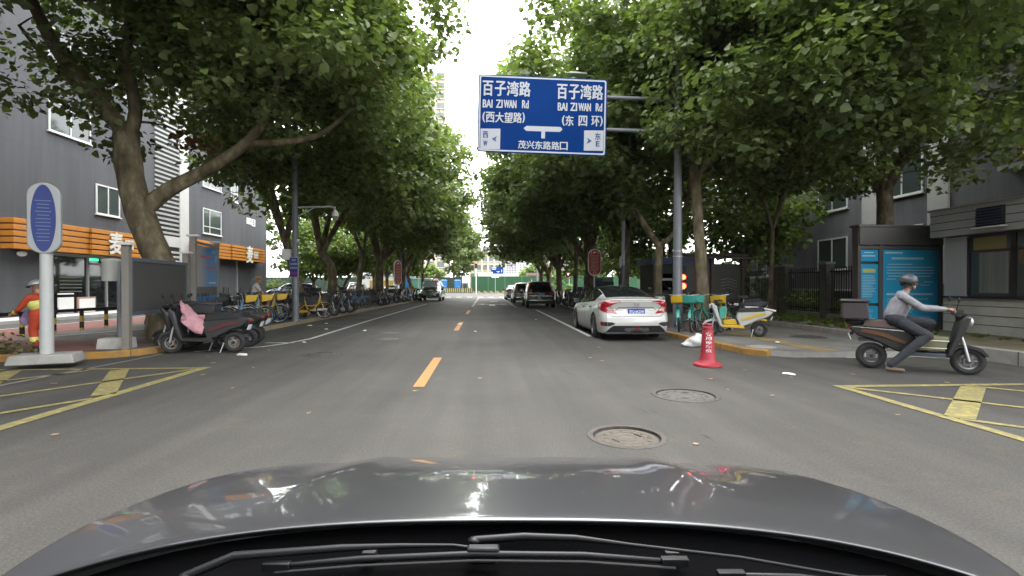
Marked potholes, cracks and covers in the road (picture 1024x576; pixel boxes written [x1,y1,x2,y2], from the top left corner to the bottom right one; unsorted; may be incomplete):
manhole cover [587,425,668,450]
manhole cover [651,388,721,403]
